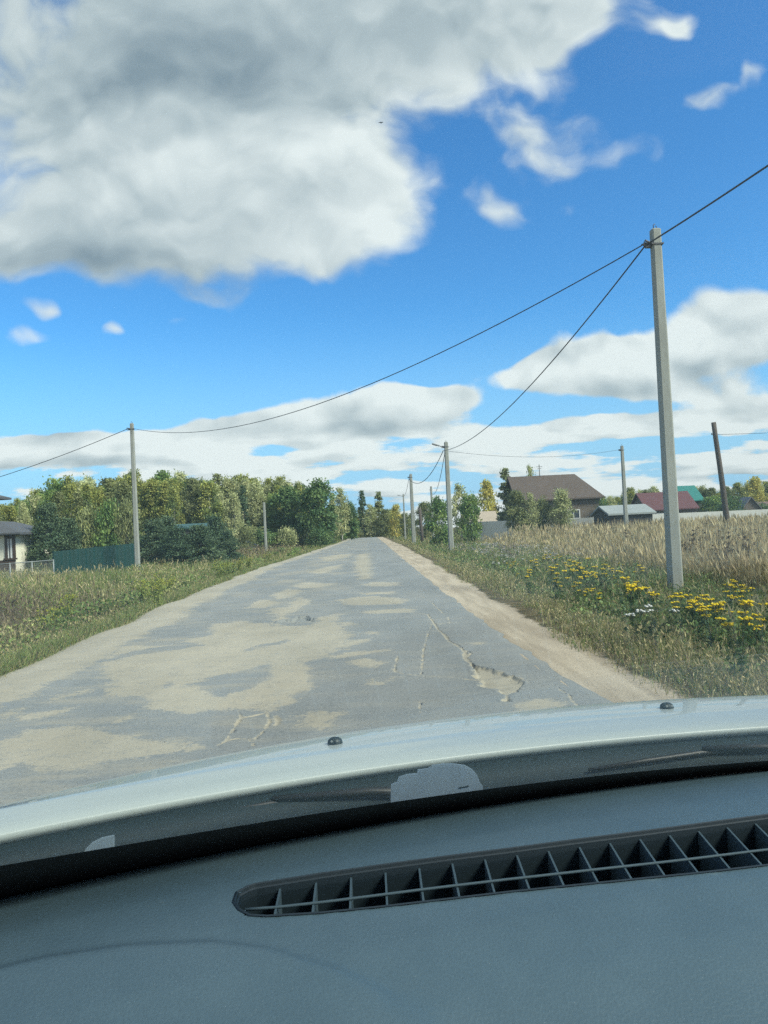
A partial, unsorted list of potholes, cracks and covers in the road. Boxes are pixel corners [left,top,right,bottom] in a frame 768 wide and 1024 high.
crack [422,614,473,665]
crack [234,711,265,727]
pothole [468,663,525,702]
pothole [277,616,316,624]
